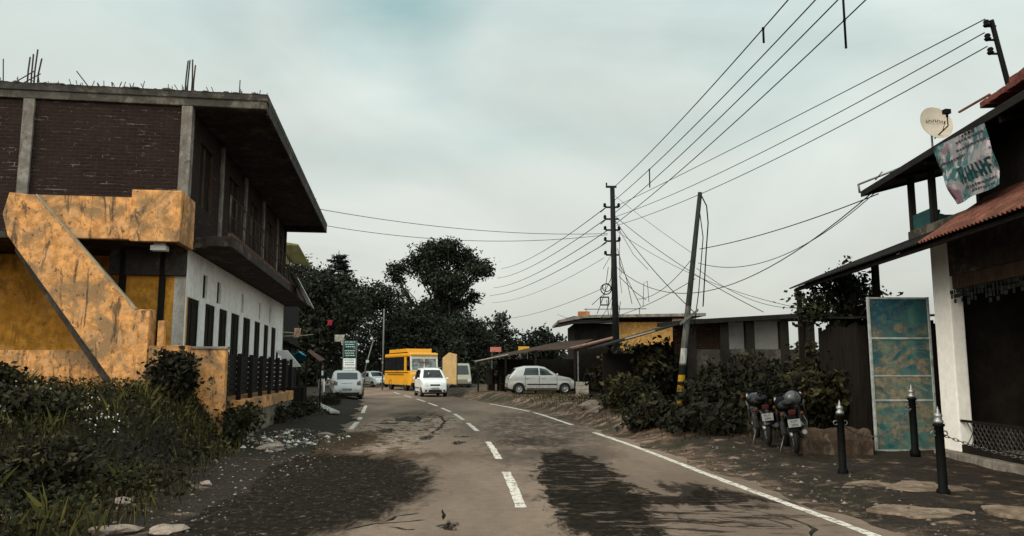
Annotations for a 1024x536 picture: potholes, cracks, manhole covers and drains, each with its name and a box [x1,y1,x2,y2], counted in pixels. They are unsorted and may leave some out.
pothole [436,520,459,531]
